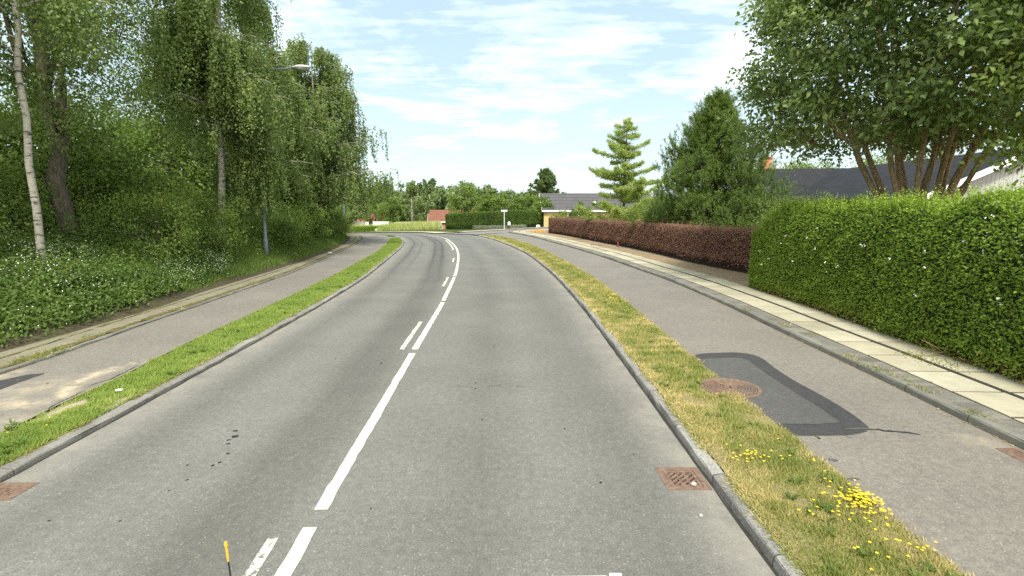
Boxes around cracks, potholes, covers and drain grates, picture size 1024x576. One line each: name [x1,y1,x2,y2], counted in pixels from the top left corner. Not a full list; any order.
drain grate [995,448,1024,463]
drain grate [655,467,712,490]
drain grate [0,482,40,501]
manhole cover [700,378,762,399]
